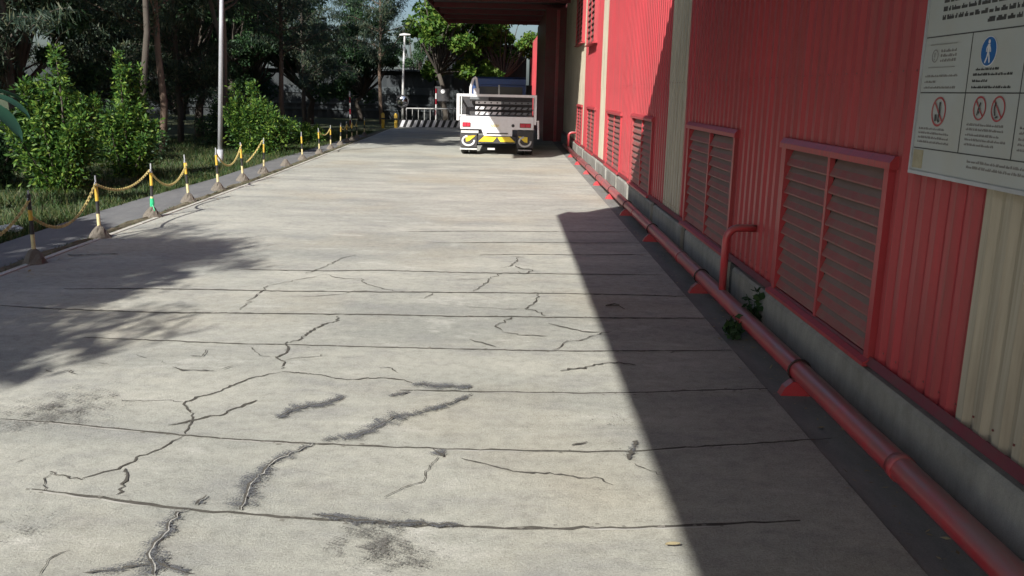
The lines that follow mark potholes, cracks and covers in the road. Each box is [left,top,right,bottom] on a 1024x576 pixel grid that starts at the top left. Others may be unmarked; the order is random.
crack [242,255,393,307]
crack [462,458,613,485]
crack [40,495,208,576]
crack [43,316,471,510]
crack [315,457,461,528]
crack [467,256,634,371]
